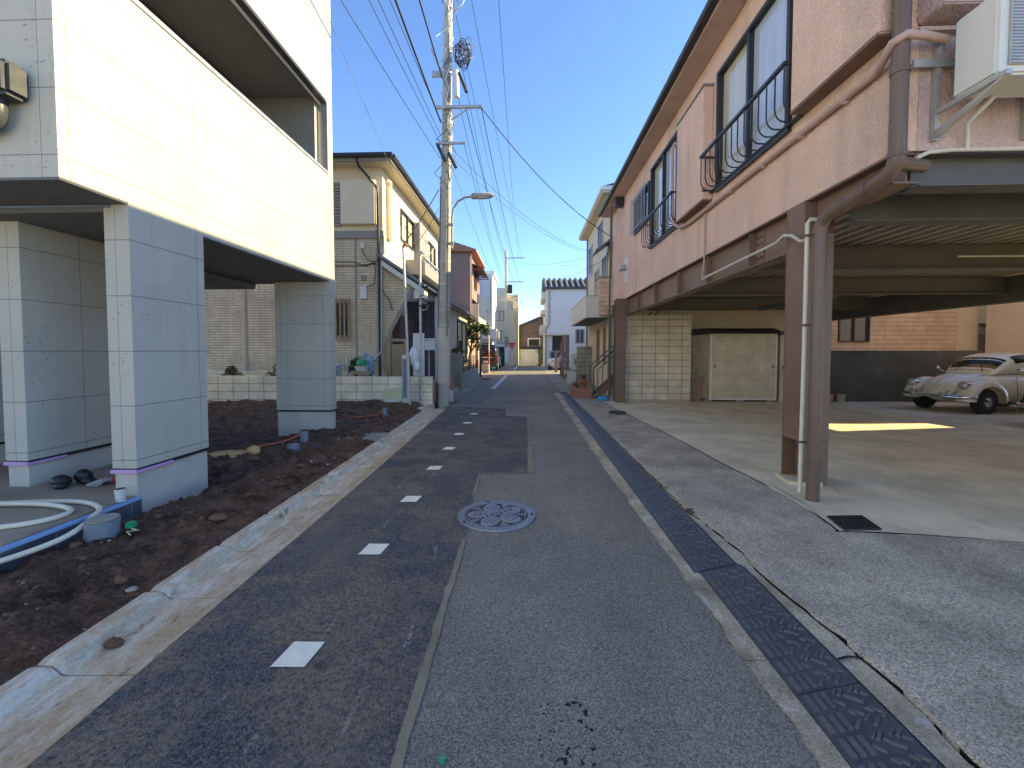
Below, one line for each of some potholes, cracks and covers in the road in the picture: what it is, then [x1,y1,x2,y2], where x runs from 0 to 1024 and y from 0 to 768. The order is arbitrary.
drain grate [827,515,882,533]
manhole cover [457,500,536,532]
